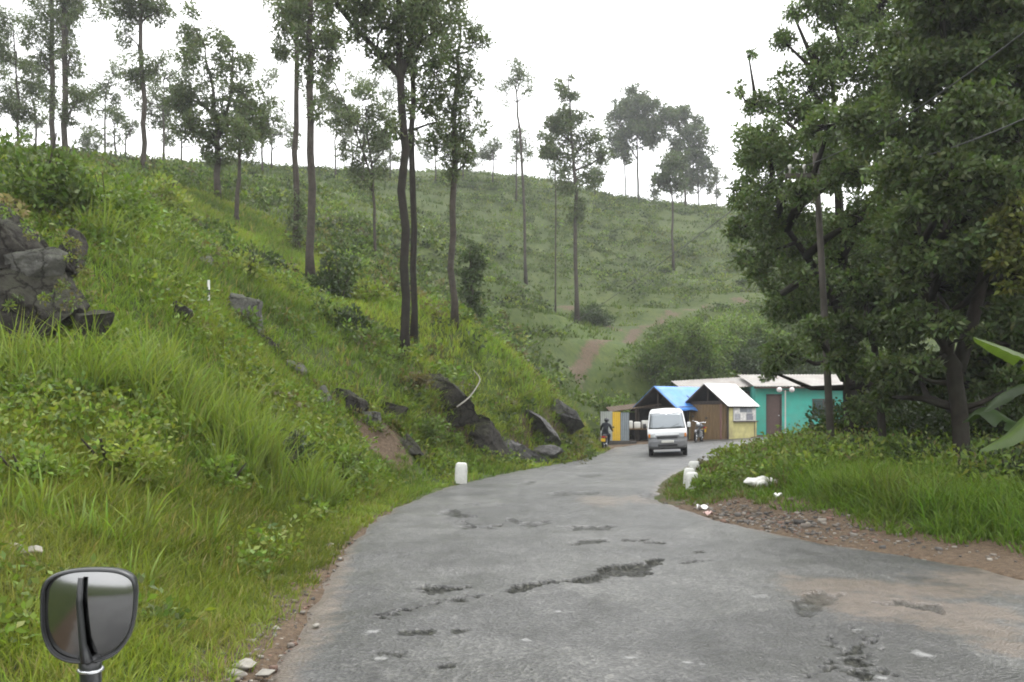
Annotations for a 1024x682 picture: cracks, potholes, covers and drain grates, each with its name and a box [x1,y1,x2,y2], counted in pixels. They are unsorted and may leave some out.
pothole [870,598,948,615]
pothole [392,628,439,636]
pothole [504,557,665,594]
pothole [437,509,478,518]
pothole [504,517,552,530]
pothole [563,538,611,547]
pothole [411,583,482,595]
pothole [788,589,846,618]
